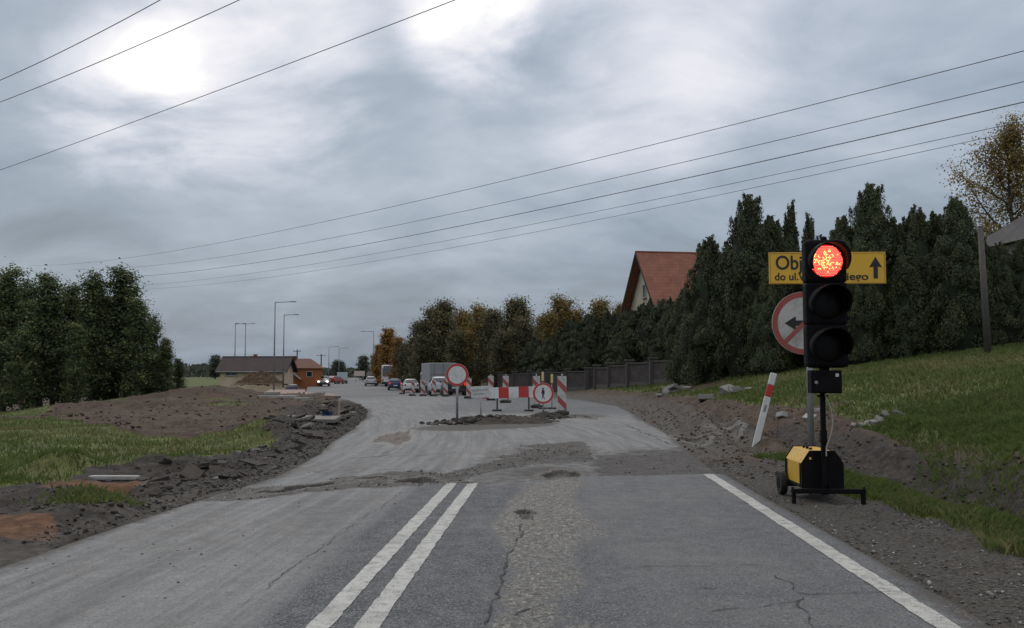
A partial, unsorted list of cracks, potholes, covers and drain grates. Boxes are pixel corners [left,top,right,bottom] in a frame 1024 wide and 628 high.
pothole [531,468,590,480]
crack [484,517,536,625]
